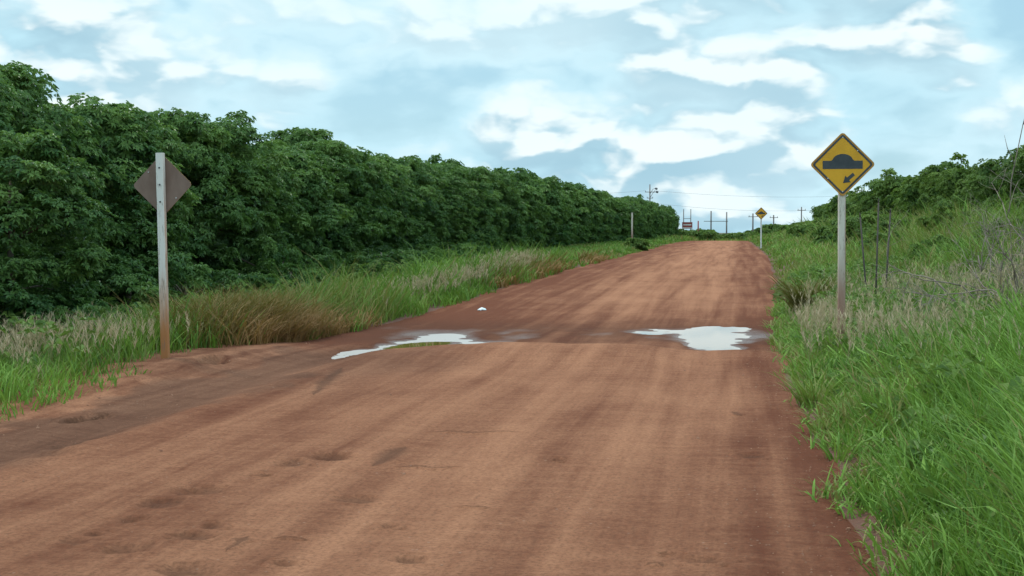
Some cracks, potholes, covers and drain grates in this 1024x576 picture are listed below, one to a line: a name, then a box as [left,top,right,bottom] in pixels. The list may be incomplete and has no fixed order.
pothole [292,448,368,463]
pothole [77,410,123,423]
pothole [48,412,107,426]
